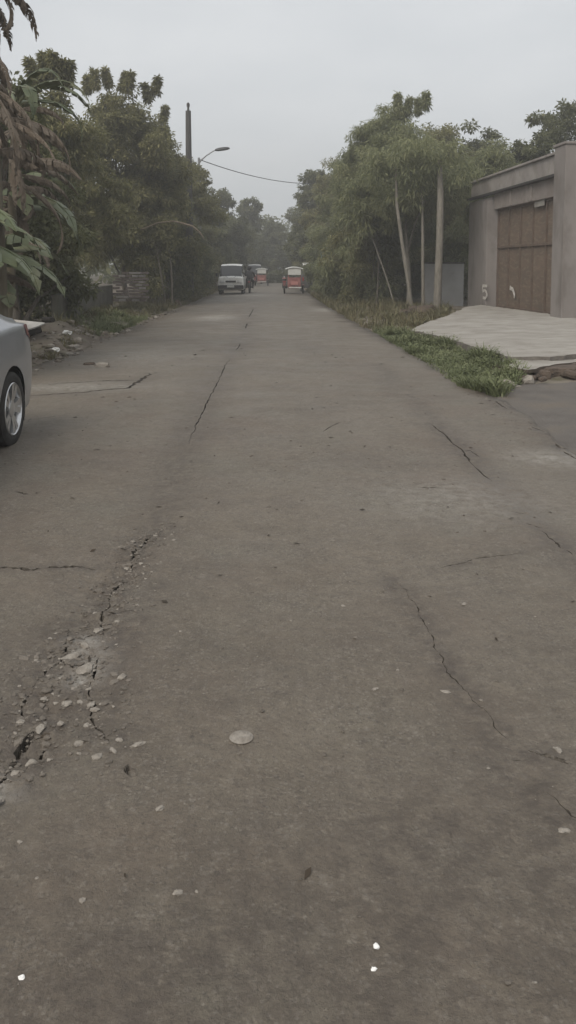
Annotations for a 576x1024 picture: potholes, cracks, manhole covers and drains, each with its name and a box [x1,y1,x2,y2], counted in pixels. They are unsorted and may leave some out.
crack [188,310,253,445]
crack [433,426,492,481]
crack [397,583,506,738]
crack [32,373,152,396]
